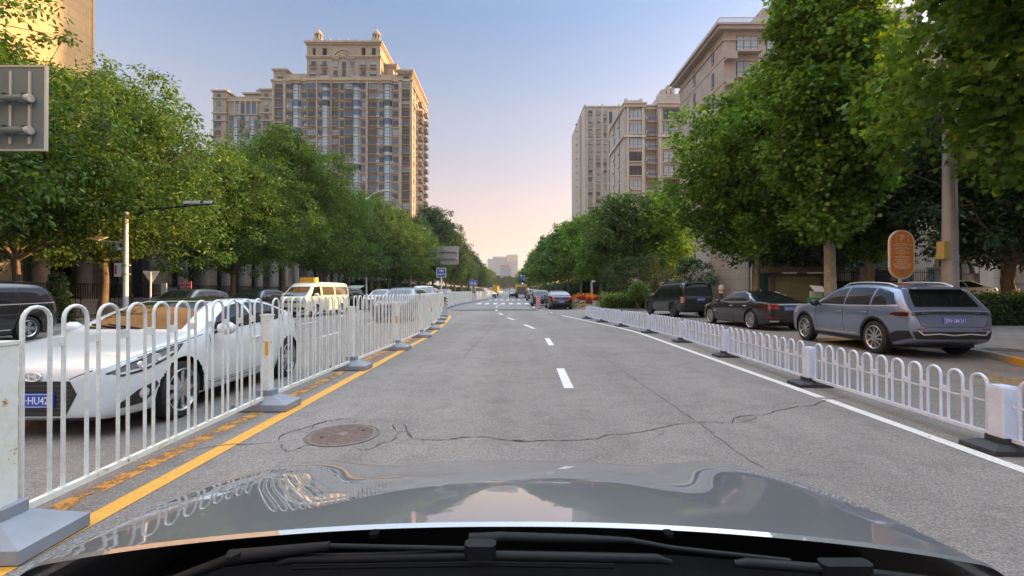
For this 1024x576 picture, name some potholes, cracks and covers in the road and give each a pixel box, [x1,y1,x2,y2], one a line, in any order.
manhole cover [304,424,380,447]
crack [195,396,847,451]
